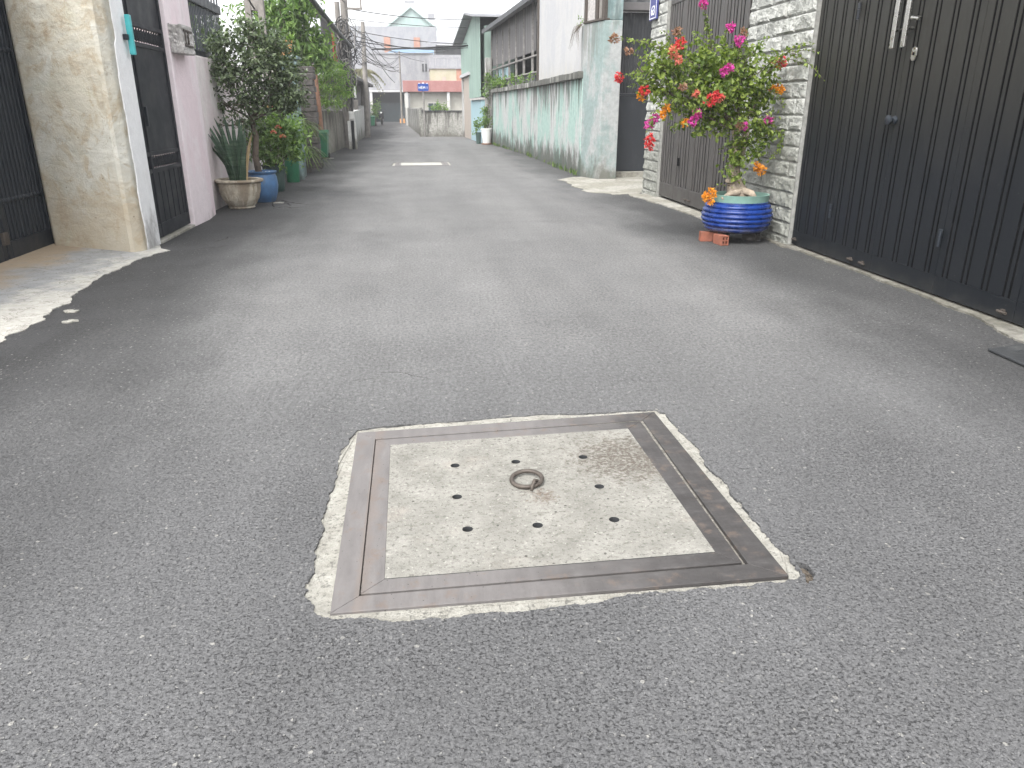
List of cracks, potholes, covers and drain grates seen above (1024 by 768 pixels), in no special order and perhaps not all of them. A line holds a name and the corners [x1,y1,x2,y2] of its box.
manhole cover [304,409,800,622]
